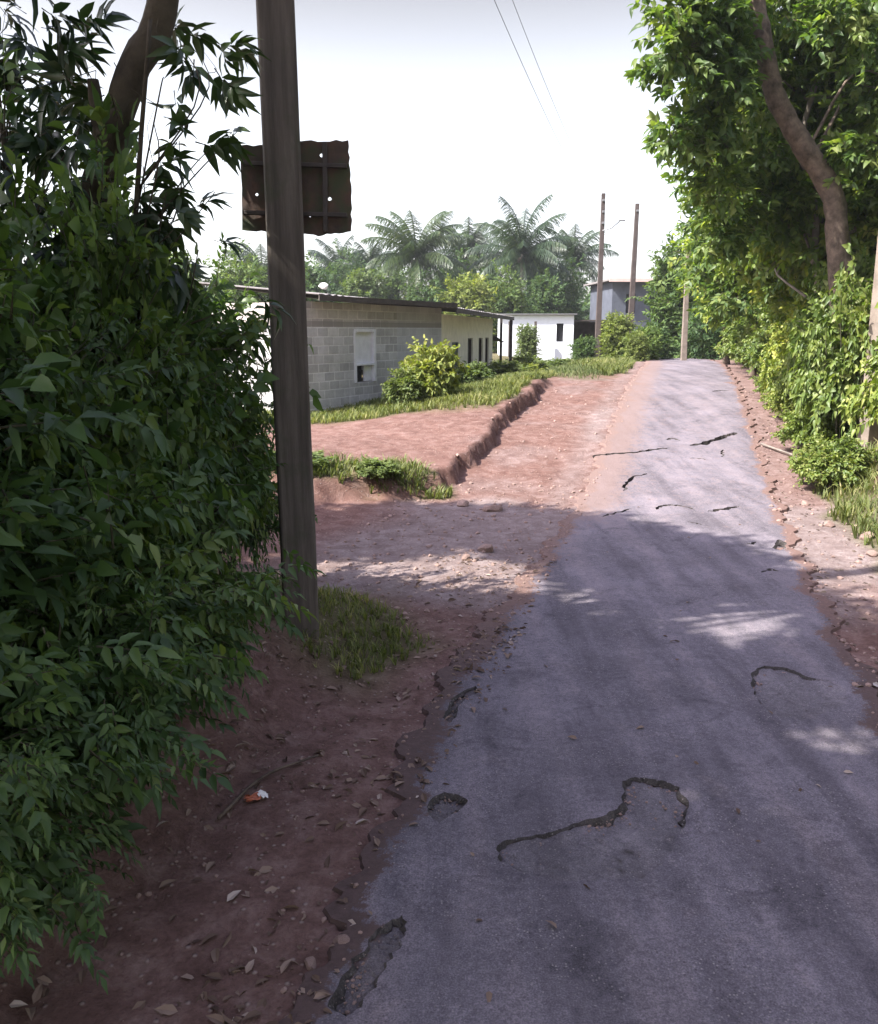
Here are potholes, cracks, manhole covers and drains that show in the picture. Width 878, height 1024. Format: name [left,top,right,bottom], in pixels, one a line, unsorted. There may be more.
crack [593,432,740,525]
pothole [328,915,407,1016]
pothole [427,792,468,824]
